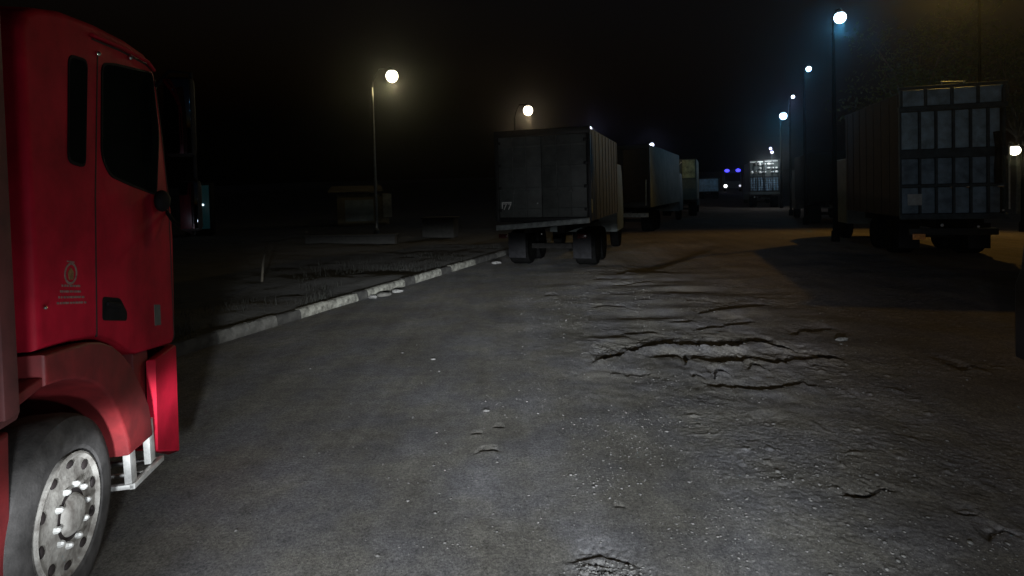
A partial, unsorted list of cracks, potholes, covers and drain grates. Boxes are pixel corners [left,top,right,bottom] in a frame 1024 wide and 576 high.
pothole [473,444,500,454]
pothole [567,538,642,569]
